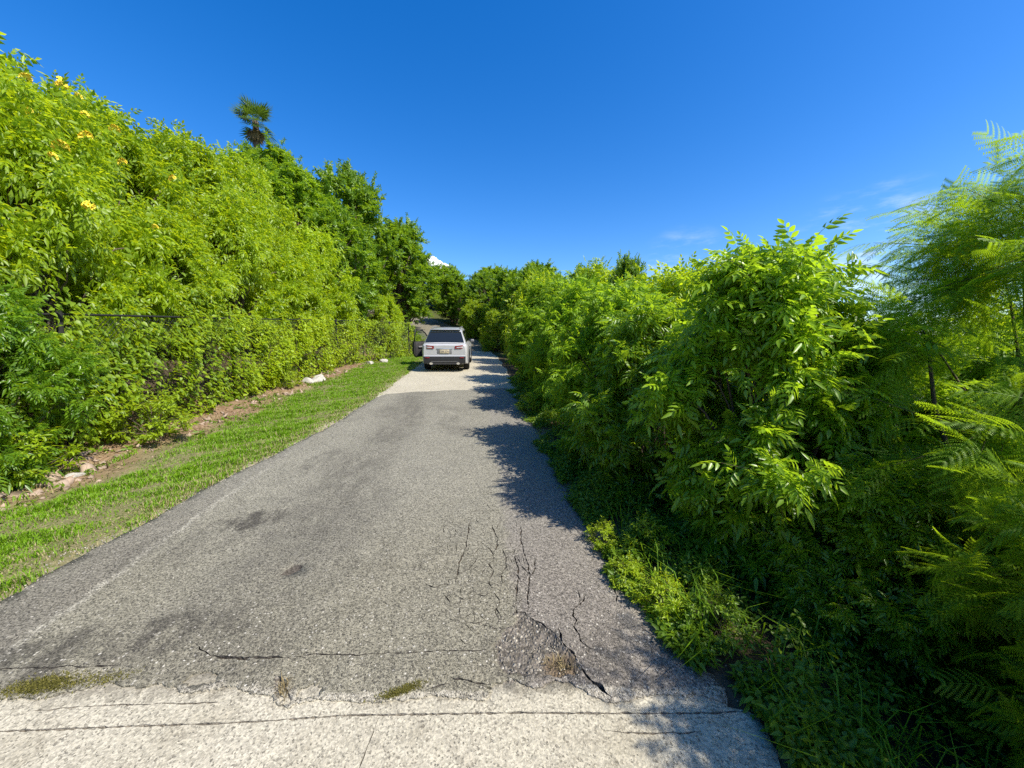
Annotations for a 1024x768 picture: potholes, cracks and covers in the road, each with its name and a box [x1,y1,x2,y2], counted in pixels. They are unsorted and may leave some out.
crack [196,644,483,660]
pothole [495,613,582,684]
crack [419,504,612,698]
